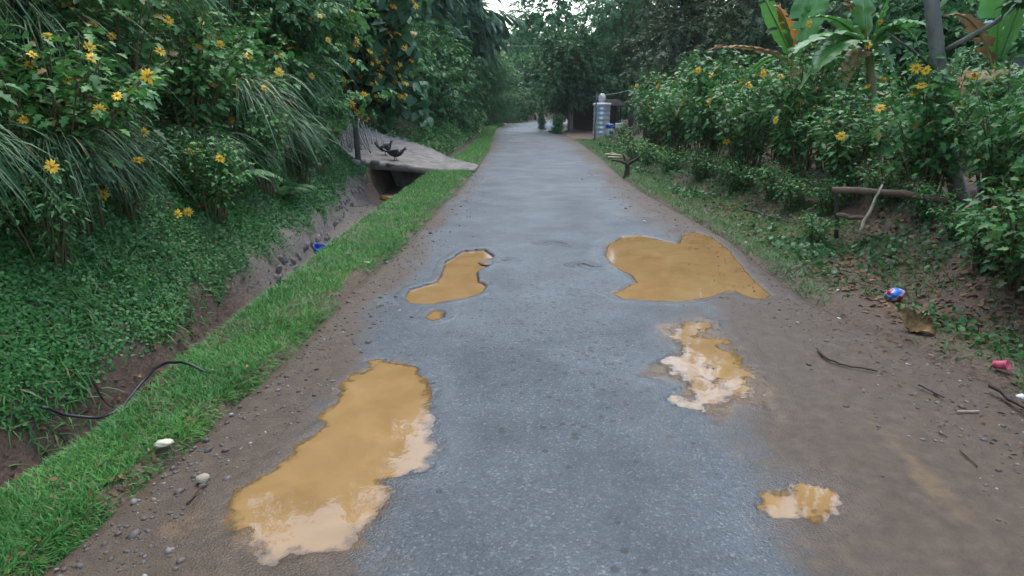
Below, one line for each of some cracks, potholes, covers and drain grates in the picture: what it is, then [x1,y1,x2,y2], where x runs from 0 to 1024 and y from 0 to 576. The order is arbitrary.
pothole [393,247,502,307]
pothole [594,229,787,305]
pothole [172,352,473,576]
pothole [616,312,801,438]
